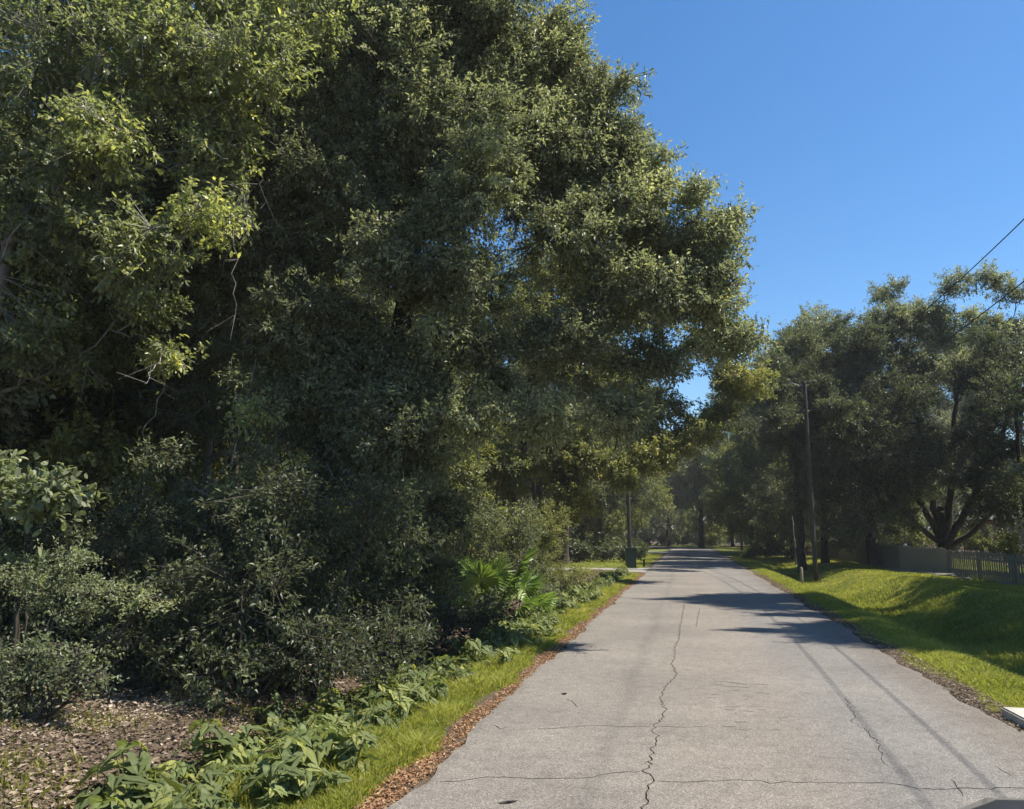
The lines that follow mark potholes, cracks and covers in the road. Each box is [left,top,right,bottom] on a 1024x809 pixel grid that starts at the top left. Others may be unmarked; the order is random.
crack [440,606,1015,809]
